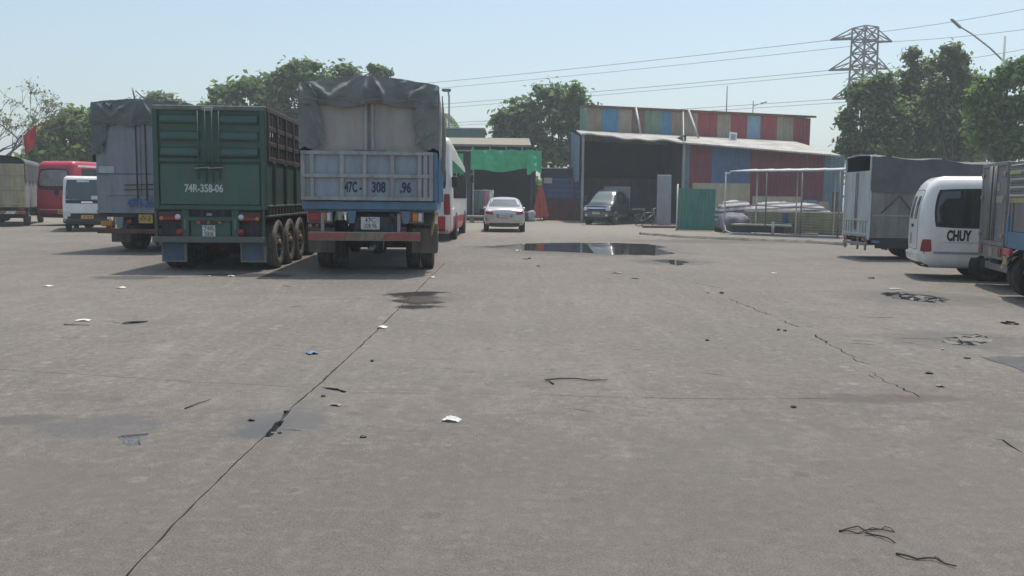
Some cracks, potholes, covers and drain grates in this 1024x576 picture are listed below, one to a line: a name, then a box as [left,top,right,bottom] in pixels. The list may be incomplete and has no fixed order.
crack [694,282,920,398]
pothole [266,409,291,437]
pothole [879,292,972,303]
pothole [118,433,148,447]
